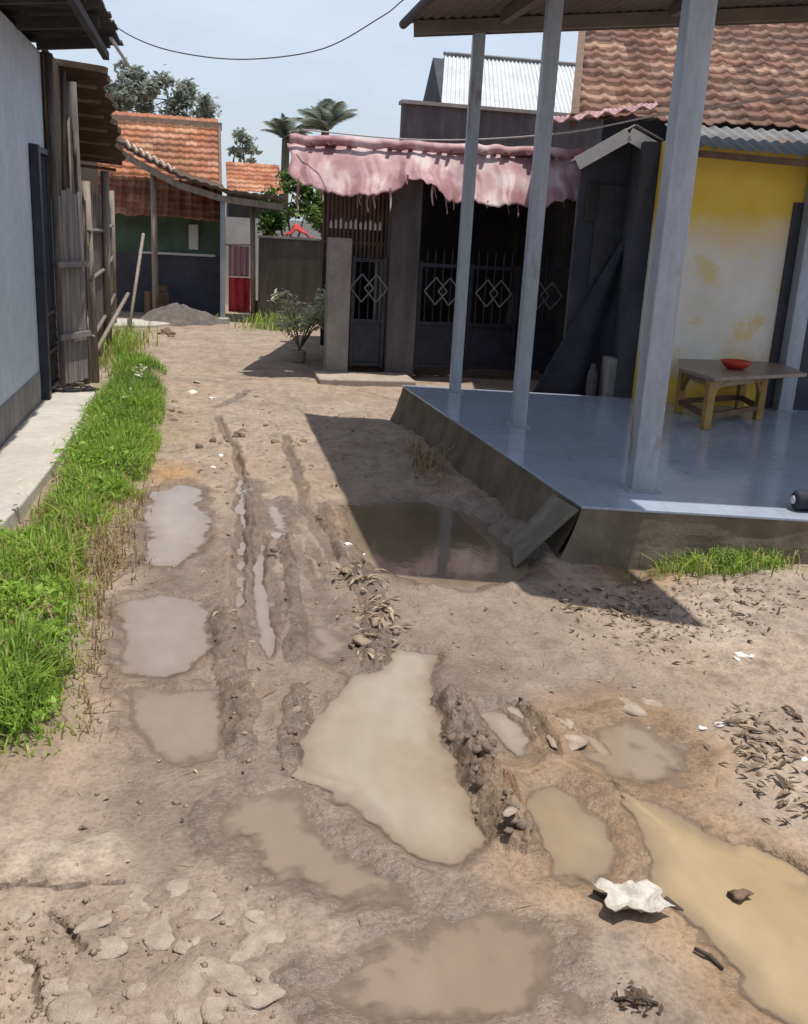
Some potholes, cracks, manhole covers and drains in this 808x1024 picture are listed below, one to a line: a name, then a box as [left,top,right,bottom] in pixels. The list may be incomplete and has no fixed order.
pothole [227,477,288,658]
pothole [327,498,554,593]
pothole [472,694,552,773]
pothole [127,477,220,572]
pothole [508,762,637,899]
pothole [100,677,230,775]
pothole [604,786,808,1024]
pothole [282,639,495,875]
pothole [268,875,618,1024]
pothole [94,587,225,683]
pothole [187,777,460,928]
pothole [548,698,721,799]
